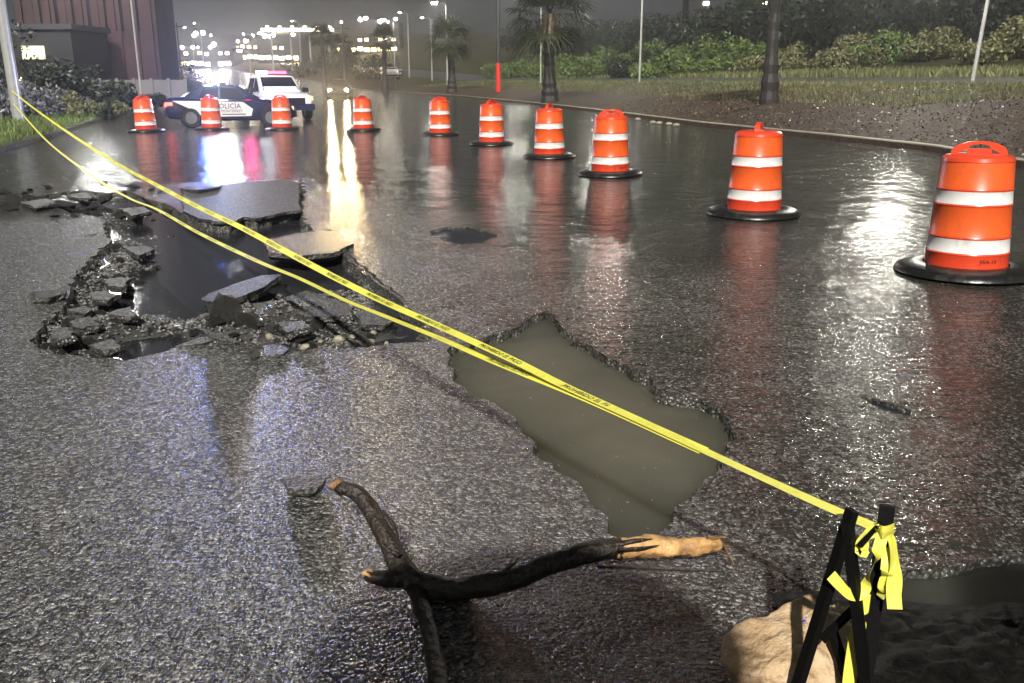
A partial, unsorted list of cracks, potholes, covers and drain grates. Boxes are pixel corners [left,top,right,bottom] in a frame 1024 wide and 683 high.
pothole [430,226,499,244]
pothole [22,190,436,361]
pothole [446,311,739,538]
